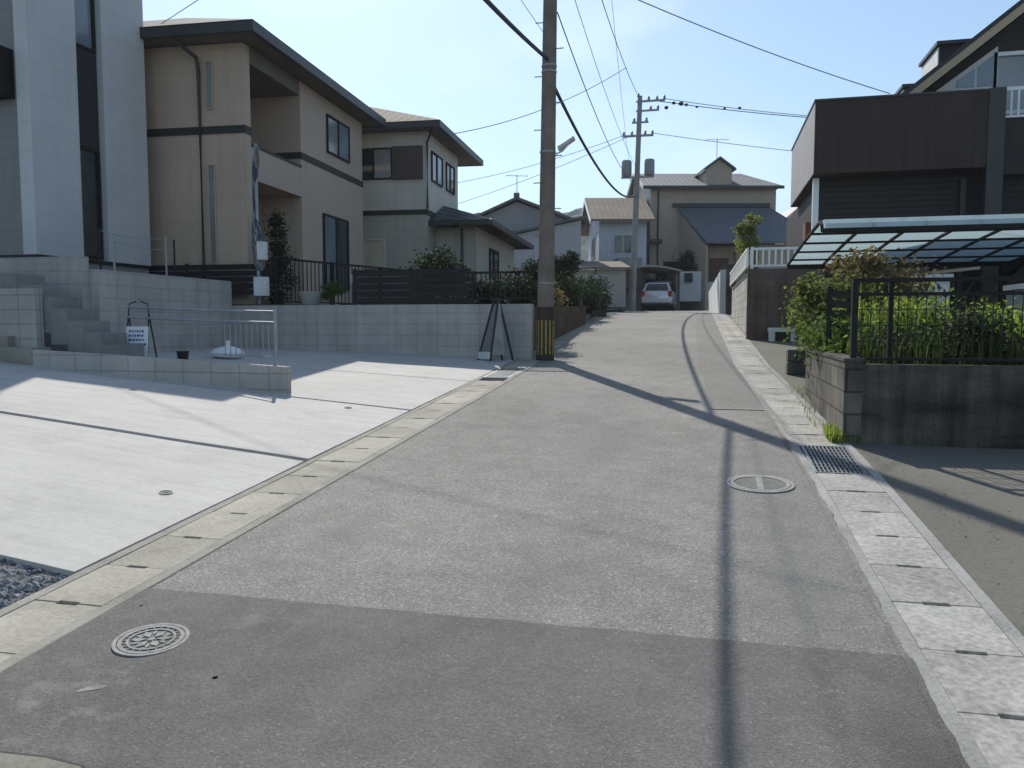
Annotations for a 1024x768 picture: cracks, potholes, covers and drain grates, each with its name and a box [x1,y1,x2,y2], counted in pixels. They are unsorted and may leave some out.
manhole cover [726,475,795,494]
manhole cover [111,623,190,657]
drain grate [801,445,868,475]
